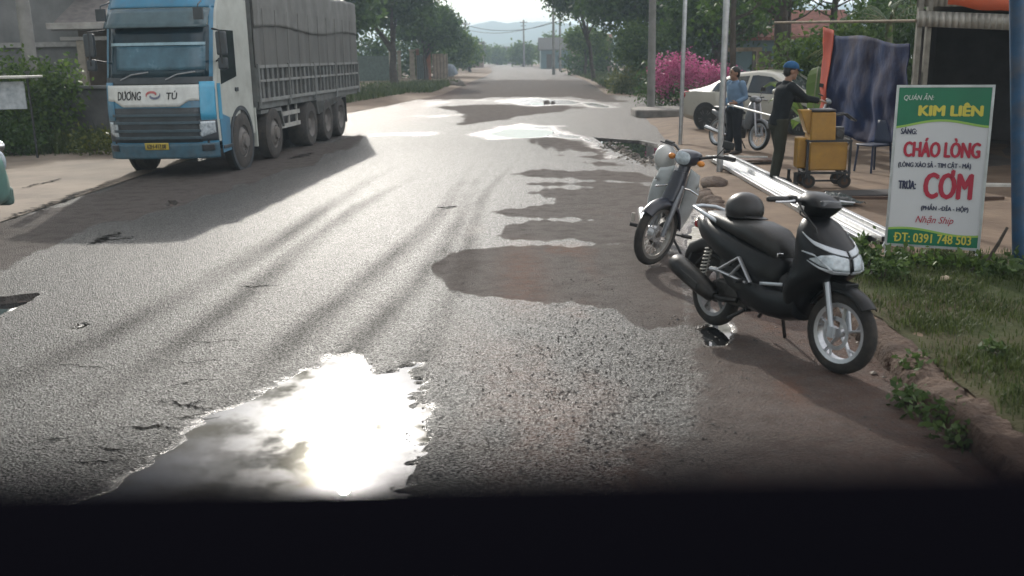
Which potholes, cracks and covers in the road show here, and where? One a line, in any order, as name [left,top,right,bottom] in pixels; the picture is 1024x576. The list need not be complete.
crack [117,340,238,429]
pothole [0,291,52,318]
pothole [589,137,664,165]
